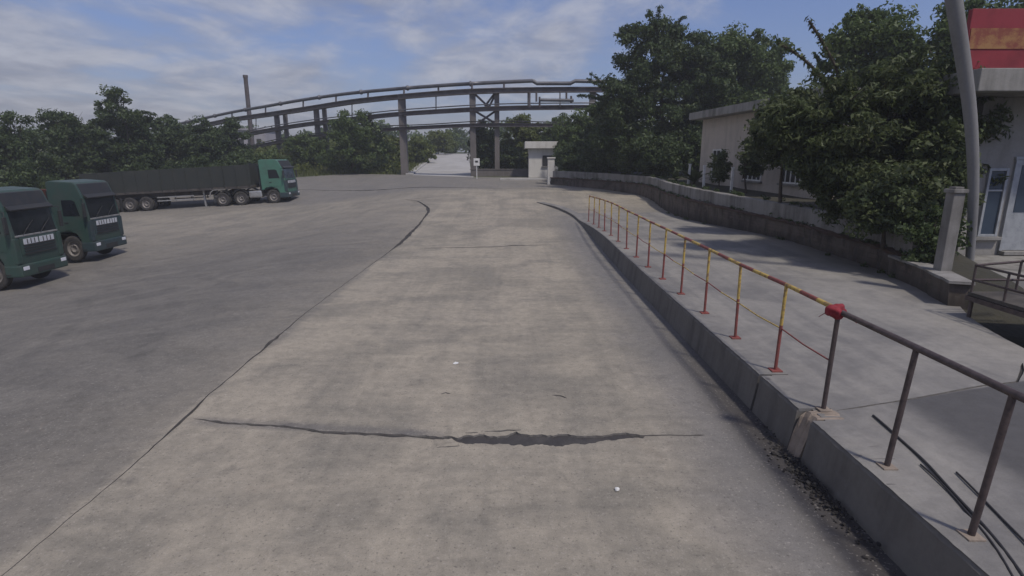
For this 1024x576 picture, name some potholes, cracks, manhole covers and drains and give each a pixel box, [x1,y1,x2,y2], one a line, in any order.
crack [199,419,703,448]
